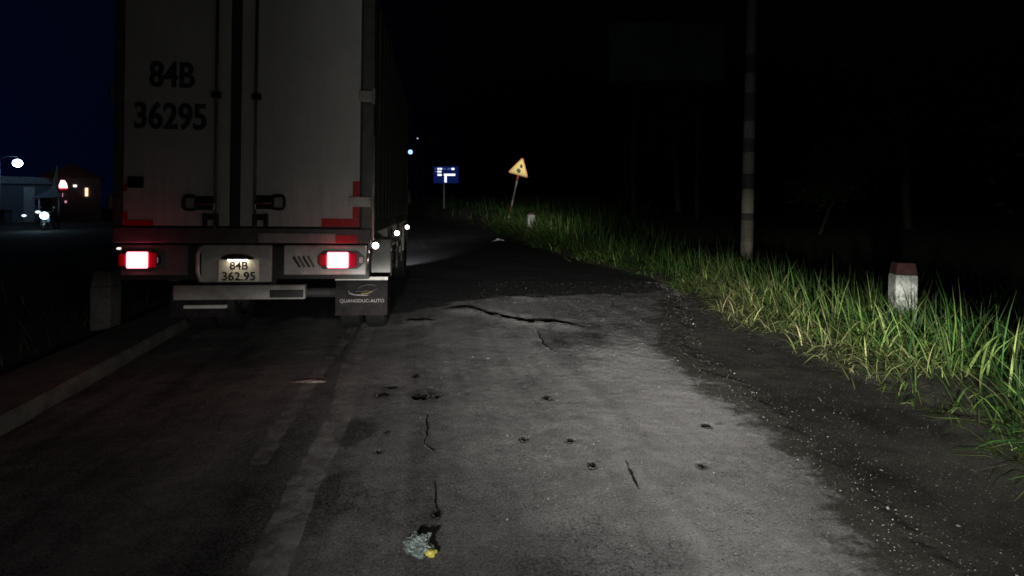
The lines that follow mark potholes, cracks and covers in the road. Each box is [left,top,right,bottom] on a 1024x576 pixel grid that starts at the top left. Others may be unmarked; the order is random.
crack [409,296,590,352]
crack [423,414,436,451]
crack [625,461,640,490]
pothole [409,391,430,401]
